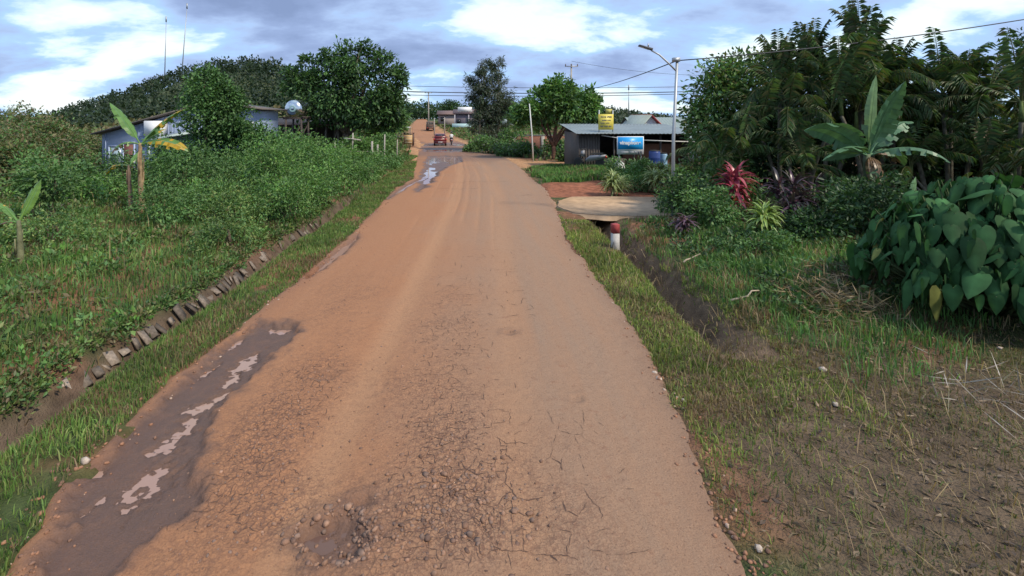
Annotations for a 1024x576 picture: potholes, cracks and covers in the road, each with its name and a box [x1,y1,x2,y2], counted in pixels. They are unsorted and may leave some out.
crack [405,318,516,412]
crack [374,407,647,575]
pothole [291,504,383,567]
